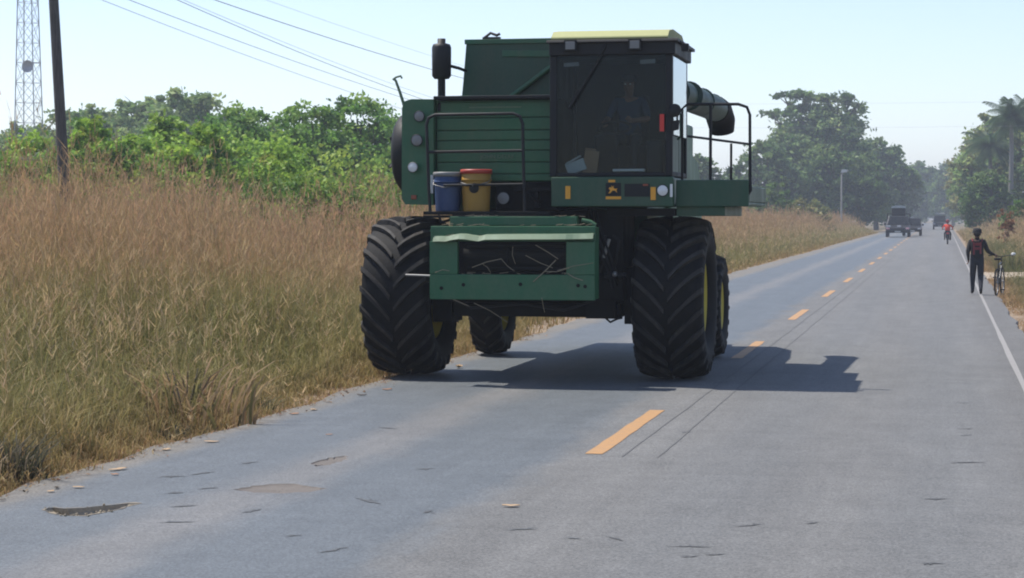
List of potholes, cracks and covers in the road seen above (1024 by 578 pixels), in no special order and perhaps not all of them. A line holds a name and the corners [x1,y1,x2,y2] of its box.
pothole [42,502,140,516]
crack [164,471,218,522]
crack [679,544,718,557]
pothole [311,456,349,467]
